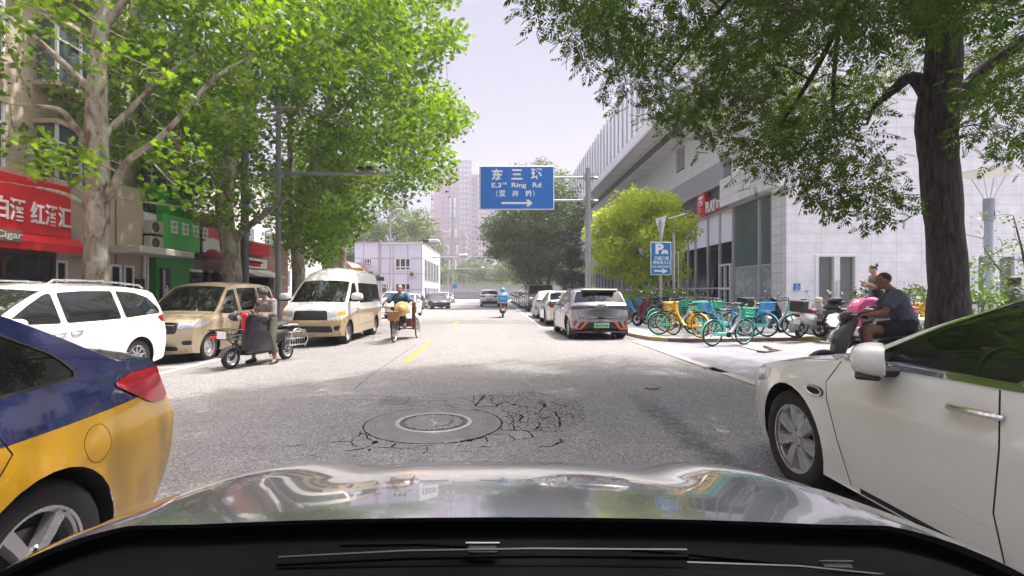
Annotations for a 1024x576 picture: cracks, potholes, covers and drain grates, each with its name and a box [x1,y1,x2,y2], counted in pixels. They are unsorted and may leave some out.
crack [286,349,594,456]
manhole cover [364,407,501,444]
